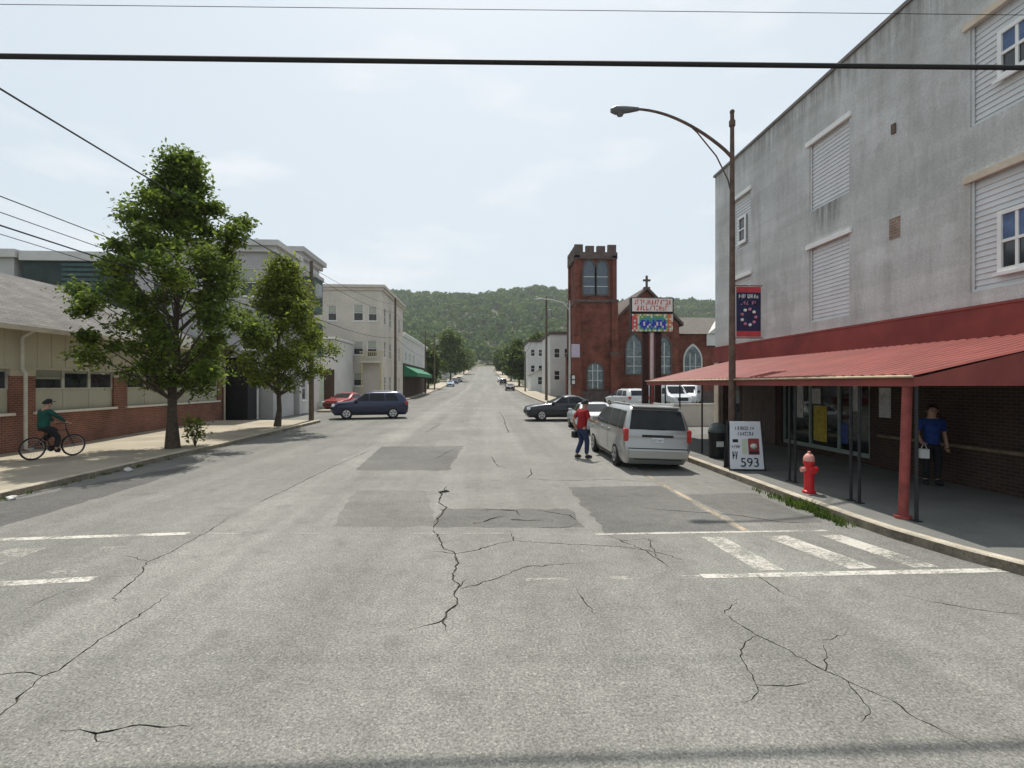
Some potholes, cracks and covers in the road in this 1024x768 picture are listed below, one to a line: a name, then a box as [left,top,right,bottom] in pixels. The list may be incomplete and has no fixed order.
crack [405,488,679,631]
crack [724,598,979,749]
crack [492,458,653,482]
crack [0,517,229,715]
crack [60,724,190,743]
